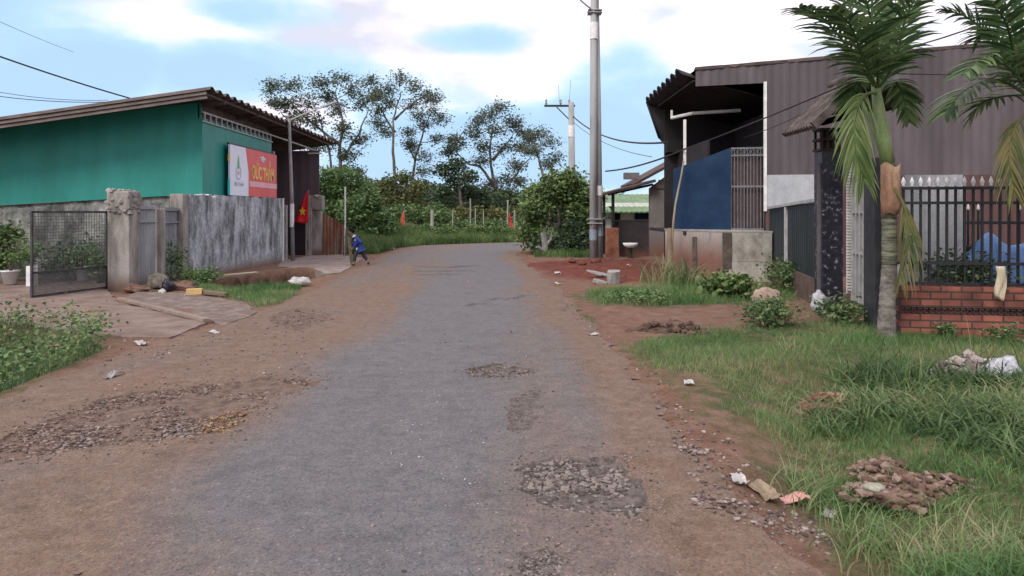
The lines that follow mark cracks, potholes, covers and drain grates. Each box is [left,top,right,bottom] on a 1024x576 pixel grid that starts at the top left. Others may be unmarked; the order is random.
crack [464,293,538,306]
pothole [0,371,341,481]
pothole [465,439,692,538]
pothole [447,358,551,385]
